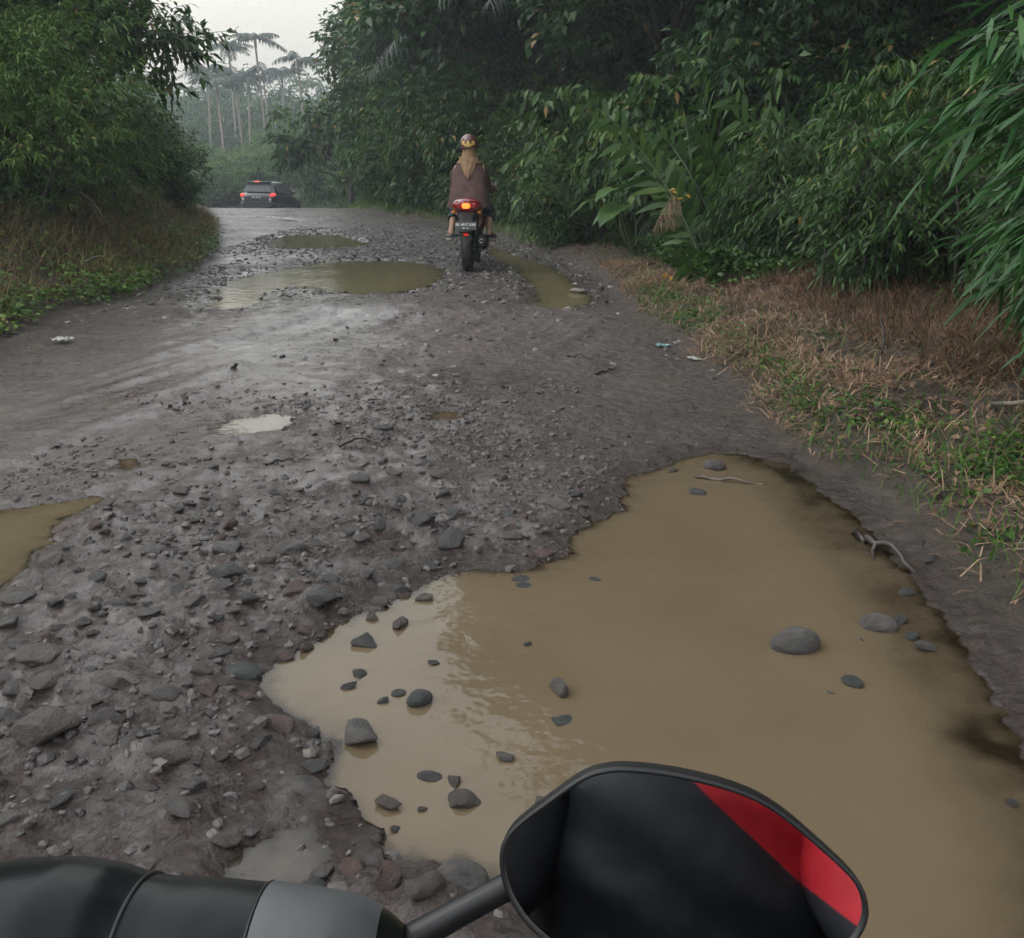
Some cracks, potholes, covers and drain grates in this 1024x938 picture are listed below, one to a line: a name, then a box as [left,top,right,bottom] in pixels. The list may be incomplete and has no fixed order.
pothole [193,797,367,887]
pothole [481,242,604,309]
pothole [226,443,1024,938]
pothole [100,452,153,471]
pothole [0,482,127,592]
pothole [259,233,379,249]
pothole [188,258,458,309]
pothole [201,405,304,435]
